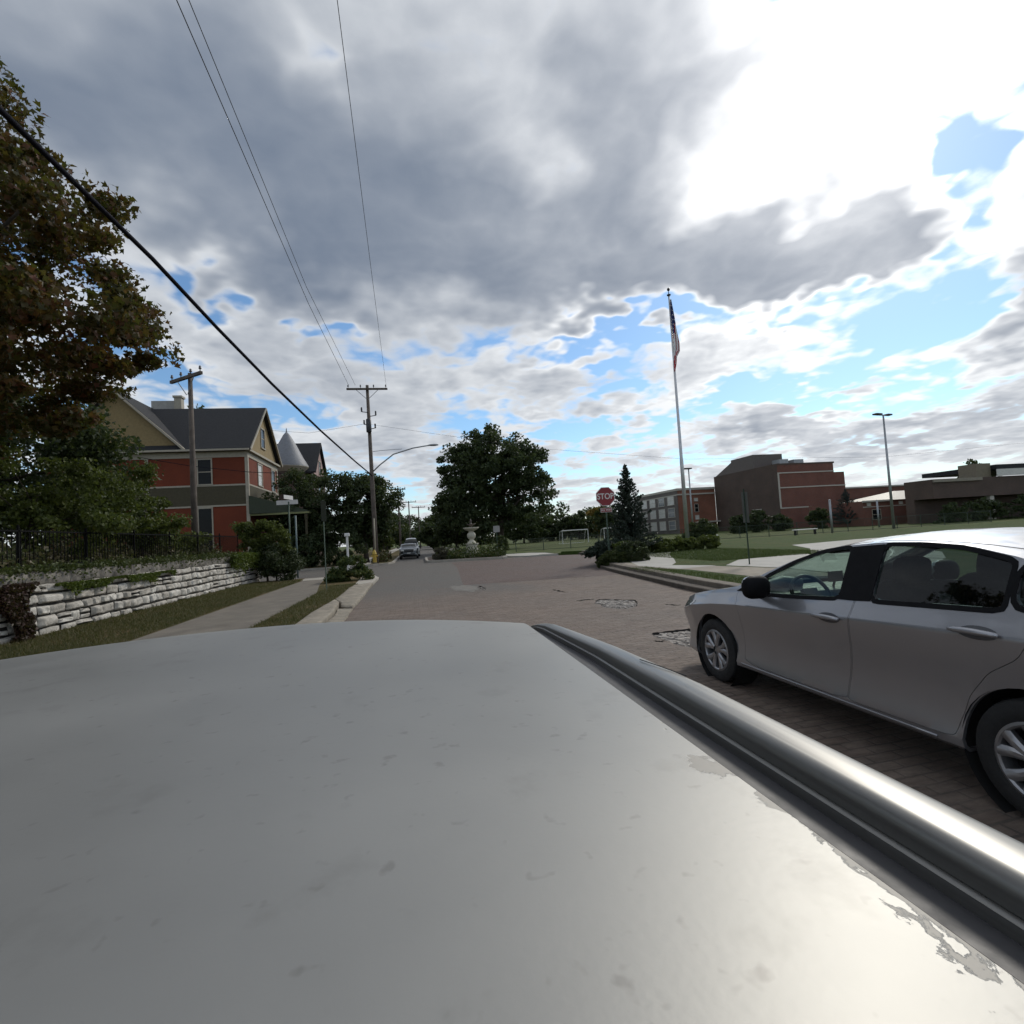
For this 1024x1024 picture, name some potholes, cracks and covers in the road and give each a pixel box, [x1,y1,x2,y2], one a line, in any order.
pothole [595,599,638,609]
pothole [652,628,691,648]
